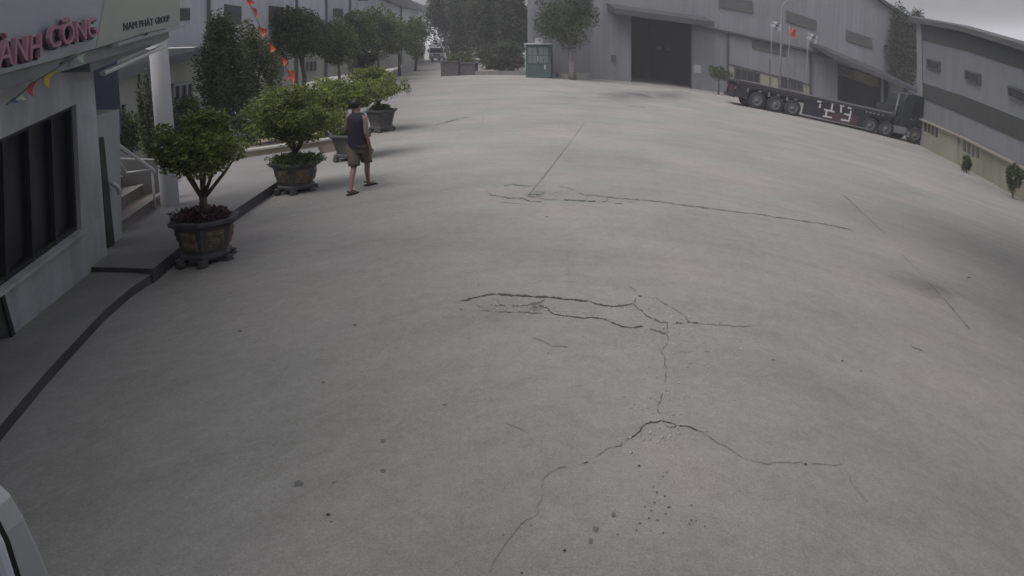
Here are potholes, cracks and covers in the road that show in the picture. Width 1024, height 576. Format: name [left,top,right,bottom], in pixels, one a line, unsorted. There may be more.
crack [485,184,851,230]
crack [460,287,751,571]
